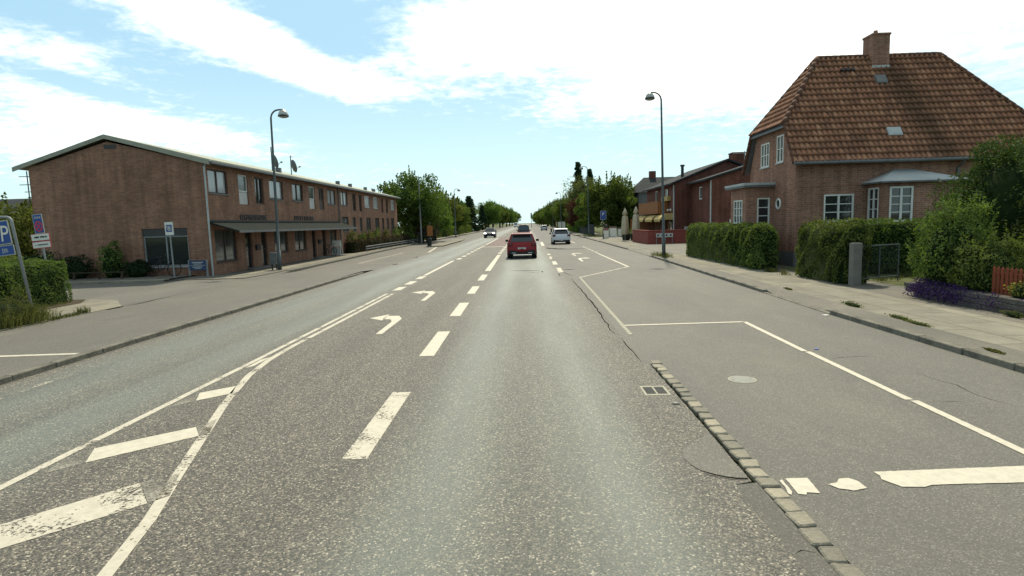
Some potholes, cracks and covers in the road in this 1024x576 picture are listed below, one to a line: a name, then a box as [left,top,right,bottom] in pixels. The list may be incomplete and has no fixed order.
drain grate [639,386,671,395]
crack [527,269,640,360]
